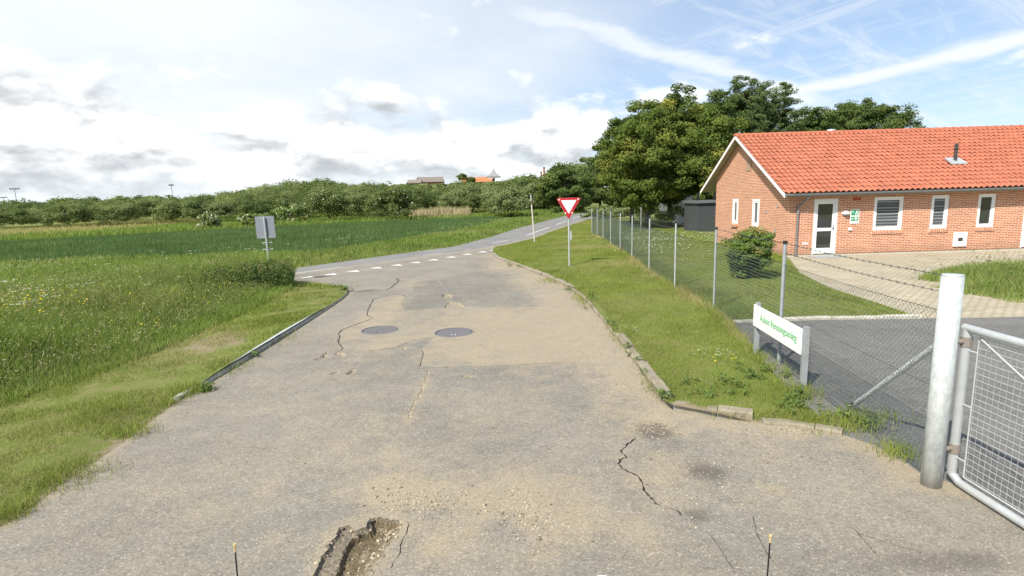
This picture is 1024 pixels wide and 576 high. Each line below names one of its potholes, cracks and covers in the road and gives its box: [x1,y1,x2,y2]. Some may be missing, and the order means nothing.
crack [338,277,432,351]
crack [370,338,575,419]
manhole cover [434,327,474,337]
crack [617,439,682,516]
crack [845,526,924,556]
pothole [313,517,403,576]
manhole cover [360,326,399,335]
crack [753,516,783,572]
